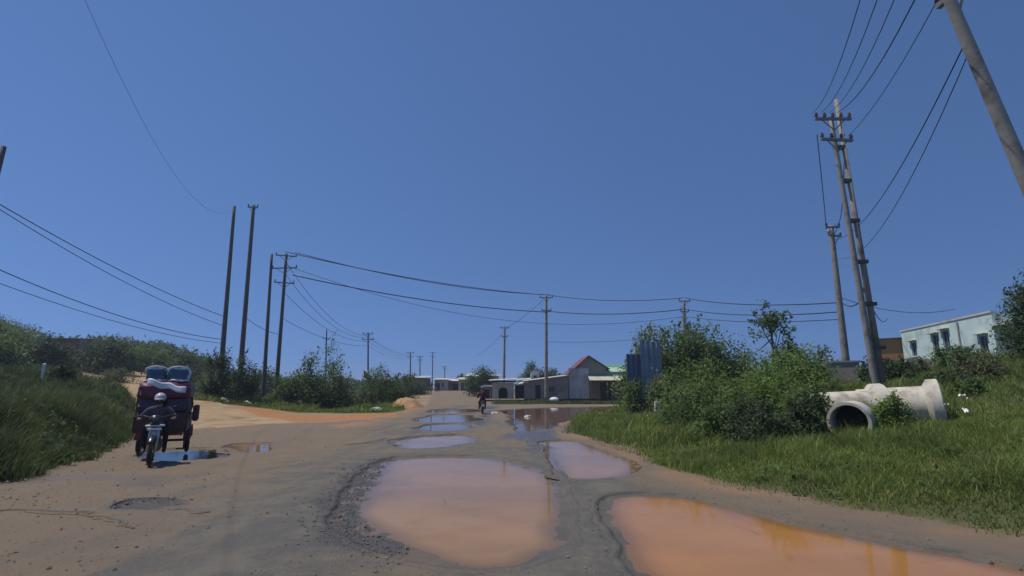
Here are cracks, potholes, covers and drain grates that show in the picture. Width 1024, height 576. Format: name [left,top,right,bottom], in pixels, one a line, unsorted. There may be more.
pothole [409,414,488,423]
crack [0,508,135,529]
pothole [534,440,650,480]
pothole [284,454,584,574]
pothole [383,433,485,449]
pothole [128,447,240,462]
pothole [589,490,1024,576]
pothole [213,442,279,454]
pothole [101,496,194,511]
pothole [407,423,482,432]
